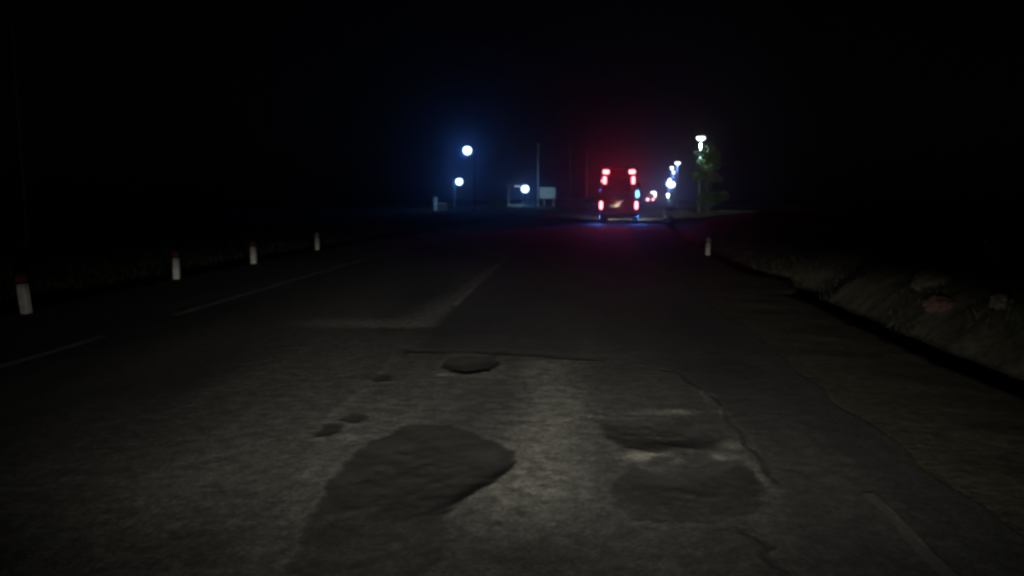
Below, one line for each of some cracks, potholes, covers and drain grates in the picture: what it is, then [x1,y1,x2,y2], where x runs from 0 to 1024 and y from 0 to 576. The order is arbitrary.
pothole [283,423,518,576]
pothole [597,416,723,453]
pothole [370,374,395,382]
pothole [606,465,767,523]
crack [635,366,783,484]
pothole [337,413,370,423]
pothole [439,355,500,375]
